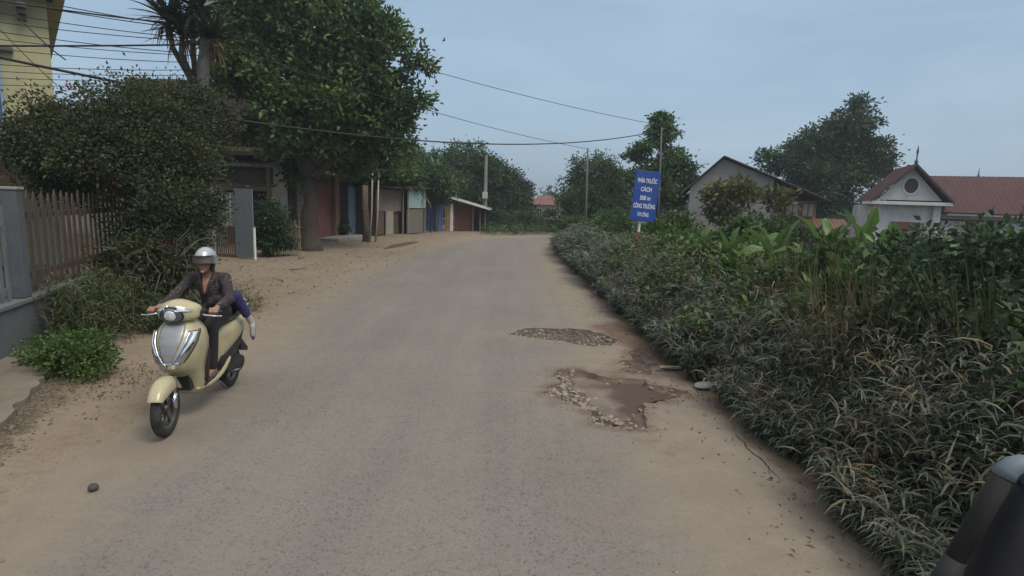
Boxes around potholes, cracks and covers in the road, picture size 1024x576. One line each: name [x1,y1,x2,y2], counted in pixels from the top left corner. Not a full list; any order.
pothole [615,349,665,376]
pothole [537,365,718,435]
pothole [494,325,628,348]
crack [735,434,782,481]
